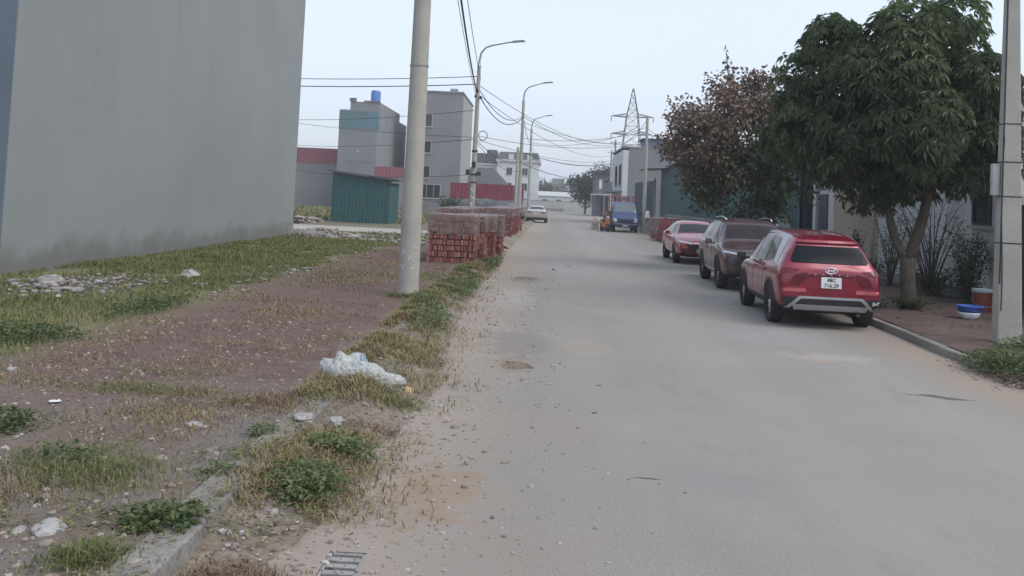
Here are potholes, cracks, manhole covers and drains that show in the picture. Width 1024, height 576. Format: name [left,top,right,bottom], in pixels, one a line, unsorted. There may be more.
drain grate [316,551,367,576]
pothole [499,361,534,370]
